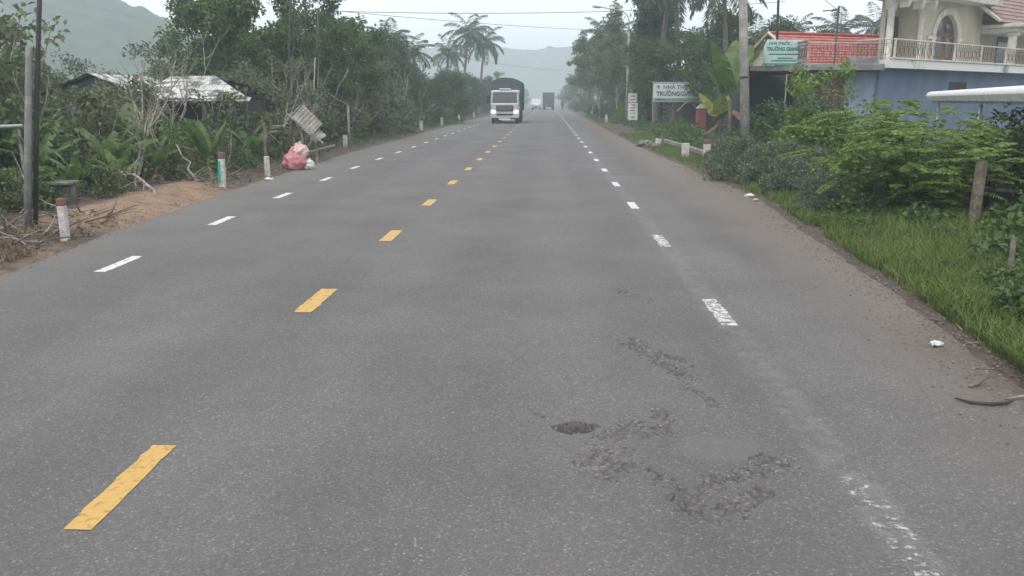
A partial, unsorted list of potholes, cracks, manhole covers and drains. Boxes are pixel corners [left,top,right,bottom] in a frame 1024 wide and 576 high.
pothole [552,421,601,435]
crack [529,337,806,526]
